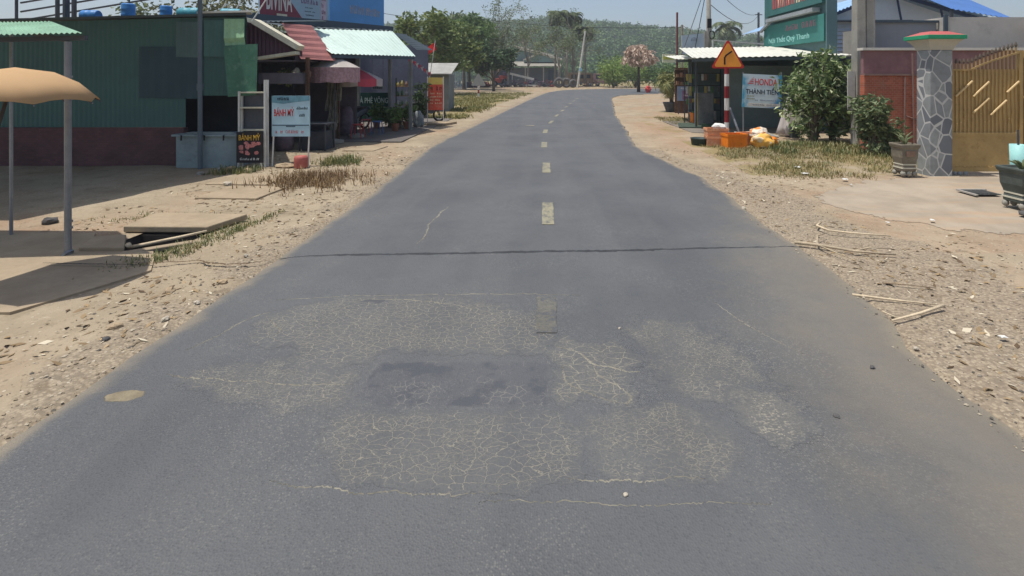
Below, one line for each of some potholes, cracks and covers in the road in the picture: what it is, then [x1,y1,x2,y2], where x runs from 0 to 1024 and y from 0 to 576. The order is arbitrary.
crack [168,293,803,499]
crack [129,206,802,265]
